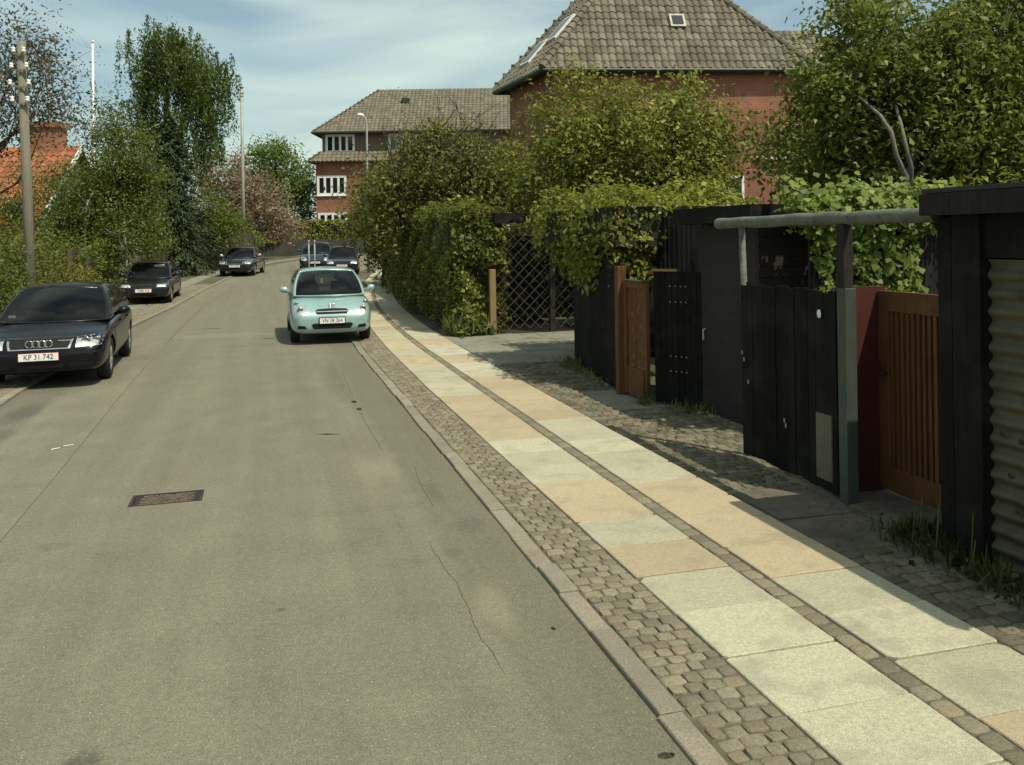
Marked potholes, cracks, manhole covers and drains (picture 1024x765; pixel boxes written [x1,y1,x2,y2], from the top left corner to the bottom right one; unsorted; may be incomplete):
crack [430,544,508,677]
crack [342,373,382,450]
